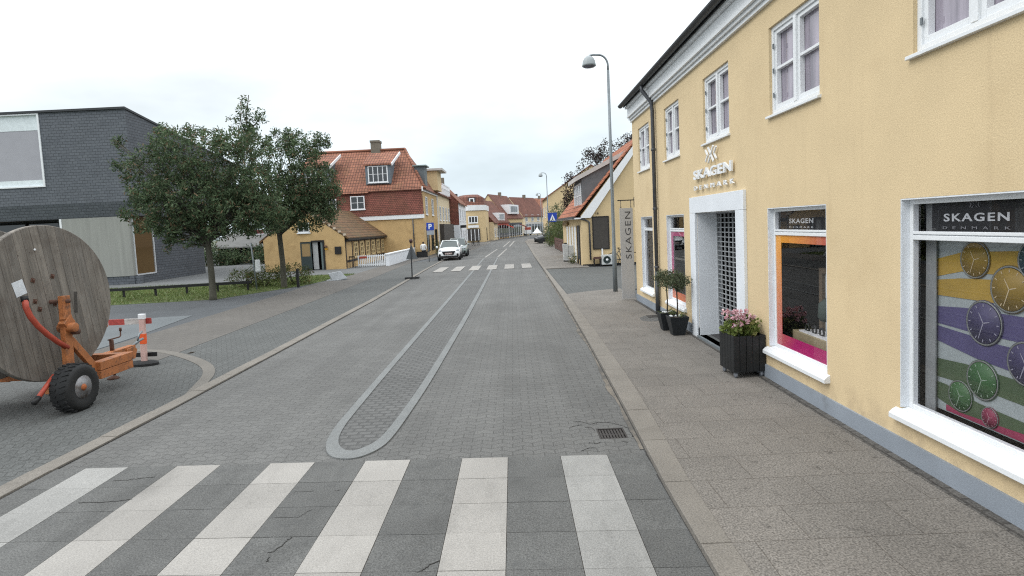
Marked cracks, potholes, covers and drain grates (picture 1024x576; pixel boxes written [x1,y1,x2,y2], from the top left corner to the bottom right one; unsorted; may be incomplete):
drain grate [596,428,628,439]
